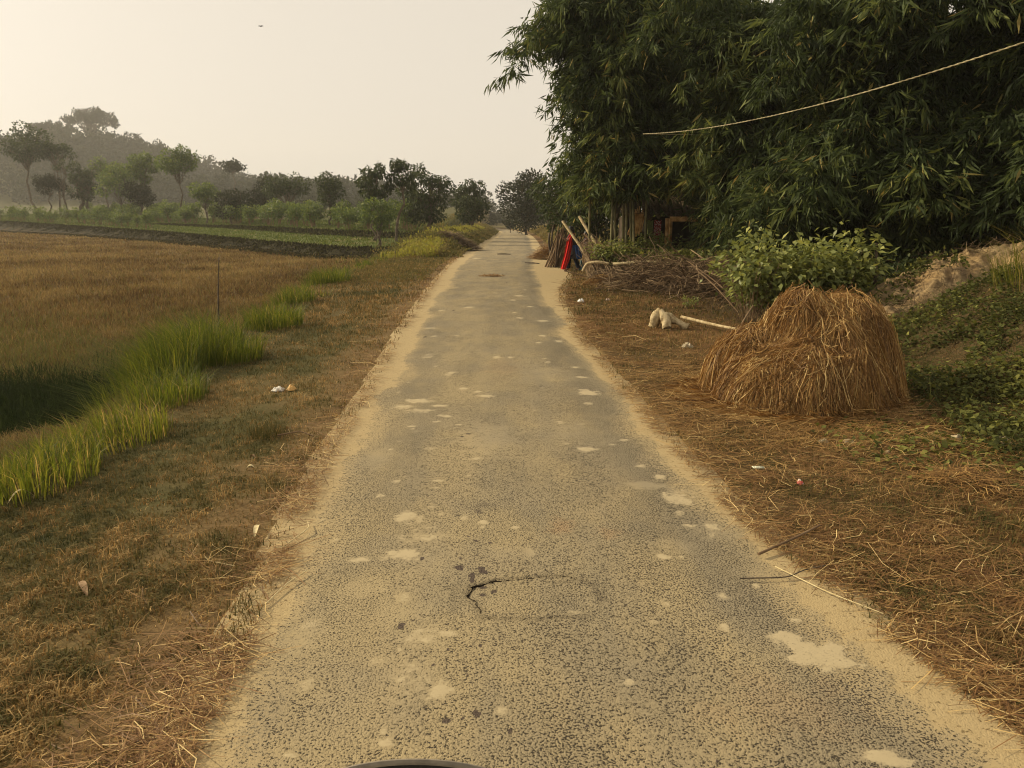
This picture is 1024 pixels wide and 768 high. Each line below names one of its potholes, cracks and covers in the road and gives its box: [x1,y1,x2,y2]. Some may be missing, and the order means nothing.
crack [466,576,572,619]
